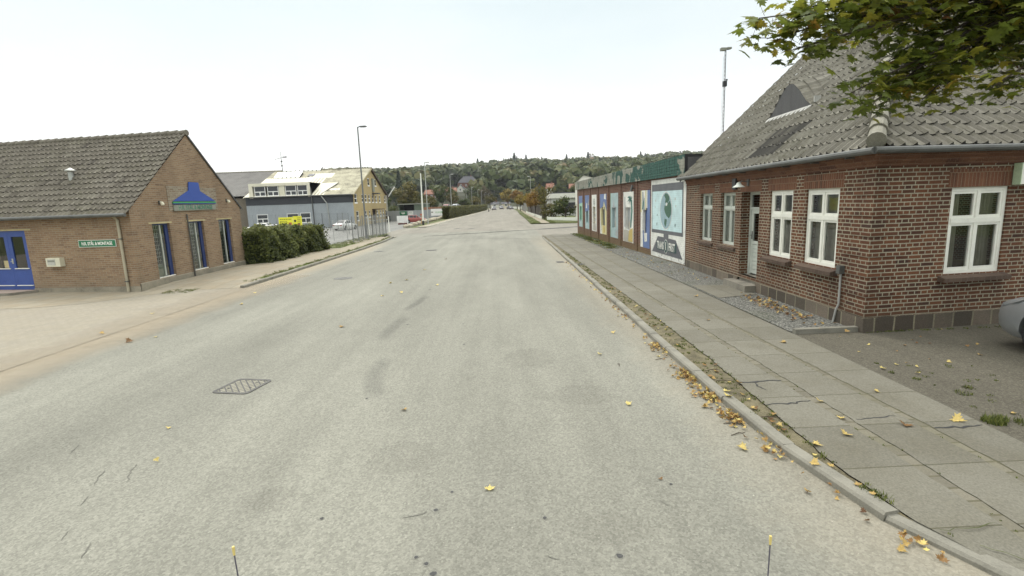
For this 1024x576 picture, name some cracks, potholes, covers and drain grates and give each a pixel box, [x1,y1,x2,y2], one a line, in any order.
crack [743,380,810,405]
